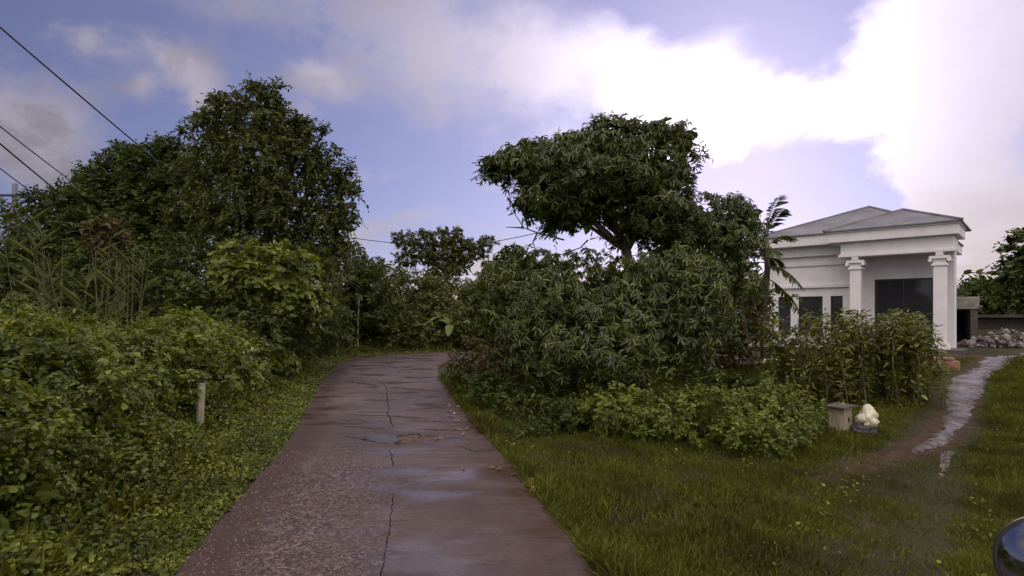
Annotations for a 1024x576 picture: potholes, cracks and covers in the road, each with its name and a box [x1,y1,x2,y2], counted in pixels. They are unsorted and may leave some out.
crack [380,494,394,576]
pothole [394,432,437,445]
crack [343,381,480,466]
